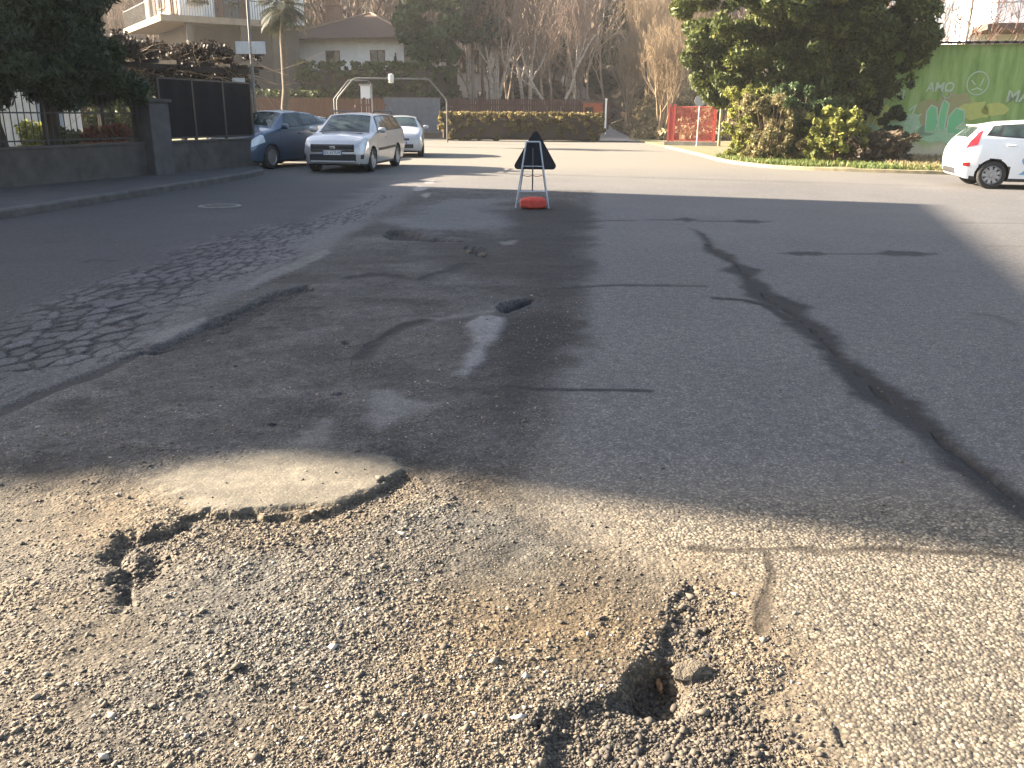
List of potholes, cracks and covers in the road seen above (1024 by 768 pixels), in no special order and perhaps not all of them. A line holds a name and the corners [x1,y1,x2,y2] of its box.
pothole [379,229,472,243]
pothole [527,576,808,768]
pothole [456,245,495,258]
crack [0,194,481,417]
crack [558,217,1024,526]
crack [687,544,1024,634]
pothole [493,297,539,314]
pothole [90,516,201,617]
